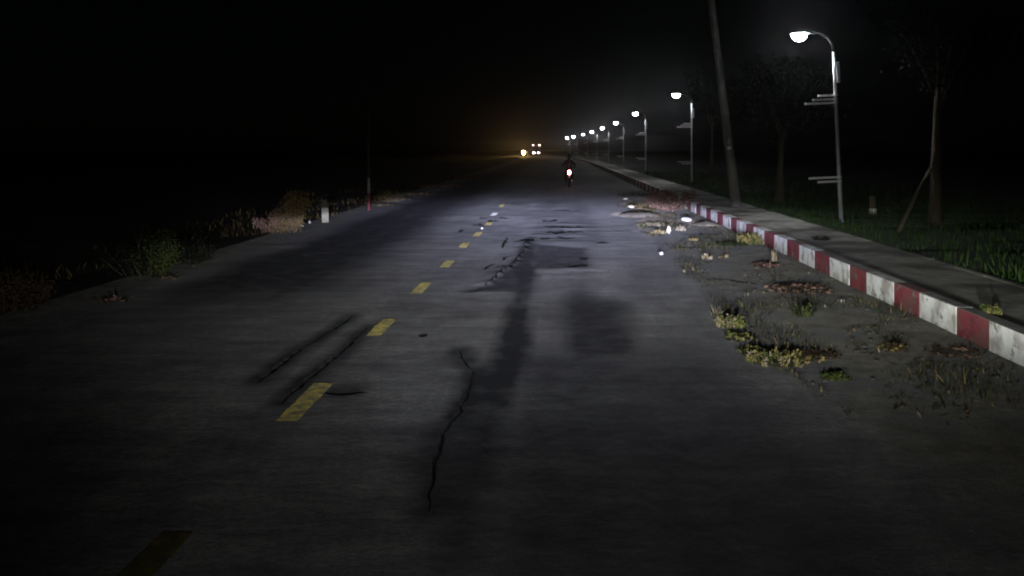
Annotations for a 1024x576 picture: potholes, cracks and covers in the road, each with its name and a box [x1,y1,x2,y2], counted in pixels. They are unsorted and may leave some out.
crack [427,350,475,511]
crack [470,237,527,292]
